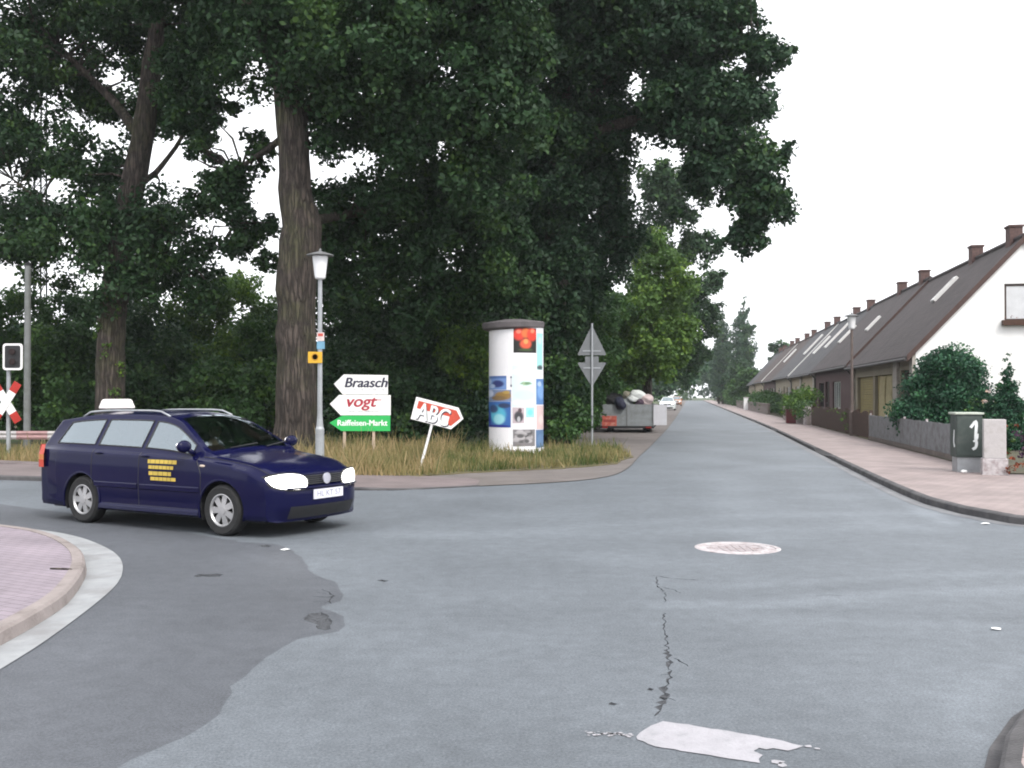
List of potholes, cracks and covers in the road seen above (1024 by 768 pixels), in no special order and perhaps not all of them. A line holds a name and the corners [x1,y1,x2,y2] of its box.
pothole [303,612,332,630]
manhole cover [695,542,781,555]
crack [653,575,694,716]
